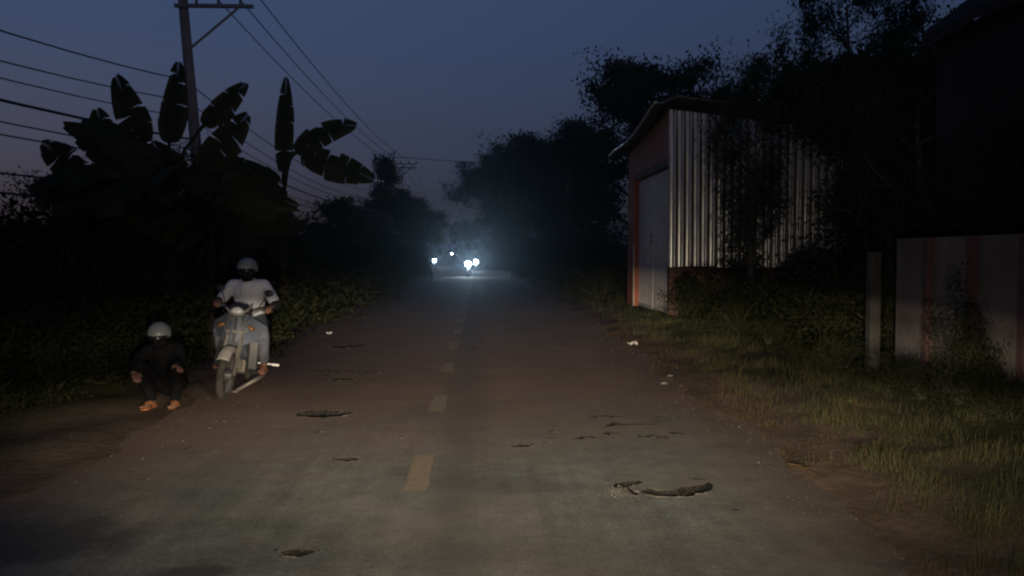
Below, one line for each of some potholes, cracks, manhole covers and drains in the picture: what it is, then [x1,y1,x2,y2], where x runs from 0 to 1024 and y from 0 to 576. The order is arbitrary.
pothole [636,482,715,500]
pothole [274,547,327,558]
pothole [604,480,644,499]
crack [542,397,687,444]
pothole [296,409,362,419]
